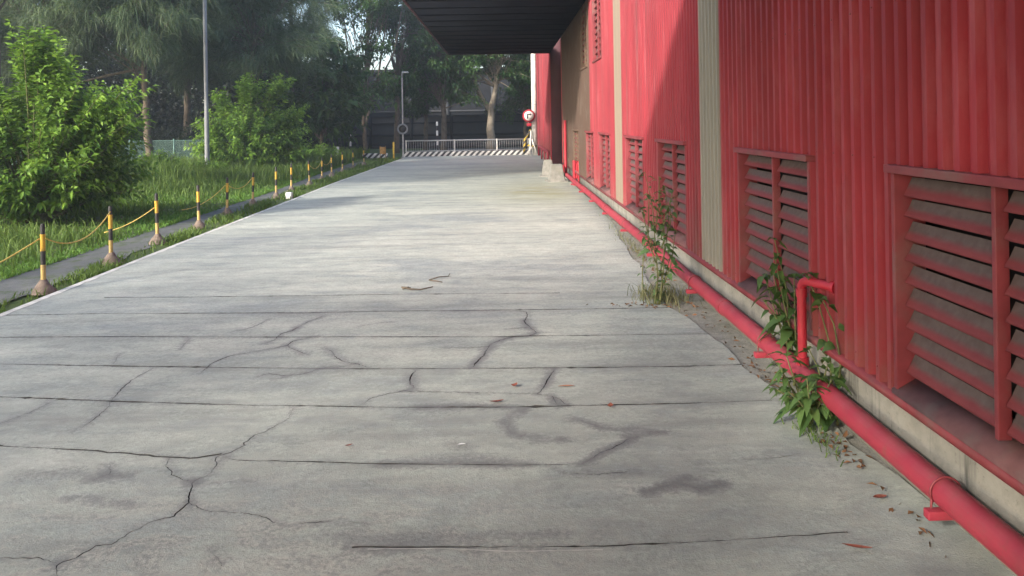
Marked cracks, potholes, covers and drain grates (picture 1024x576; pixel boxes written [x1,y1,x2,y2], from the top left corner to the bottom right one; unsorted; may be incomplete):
crack [203,320,363,379]
crack [362,371,565,404]
crack [3,410,365,573]
crack [472,311,539,367]
